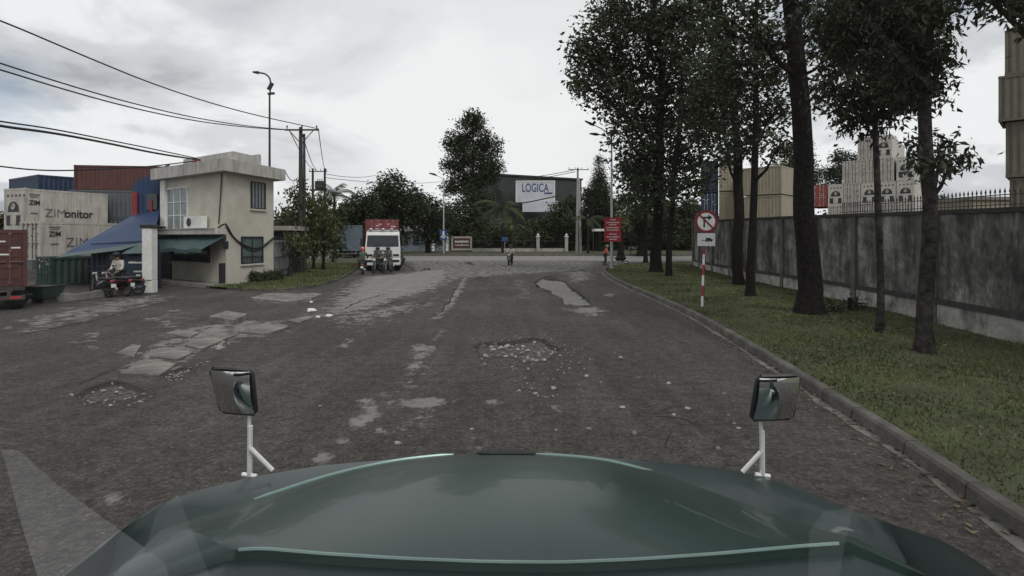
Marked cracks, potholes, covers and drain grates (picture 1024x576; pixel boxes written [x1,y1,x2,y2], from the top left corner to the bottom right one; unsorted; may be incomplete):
pothole [67,379,153,403]
pothole [470,338,568,363]
crack [405,260,463,317]
